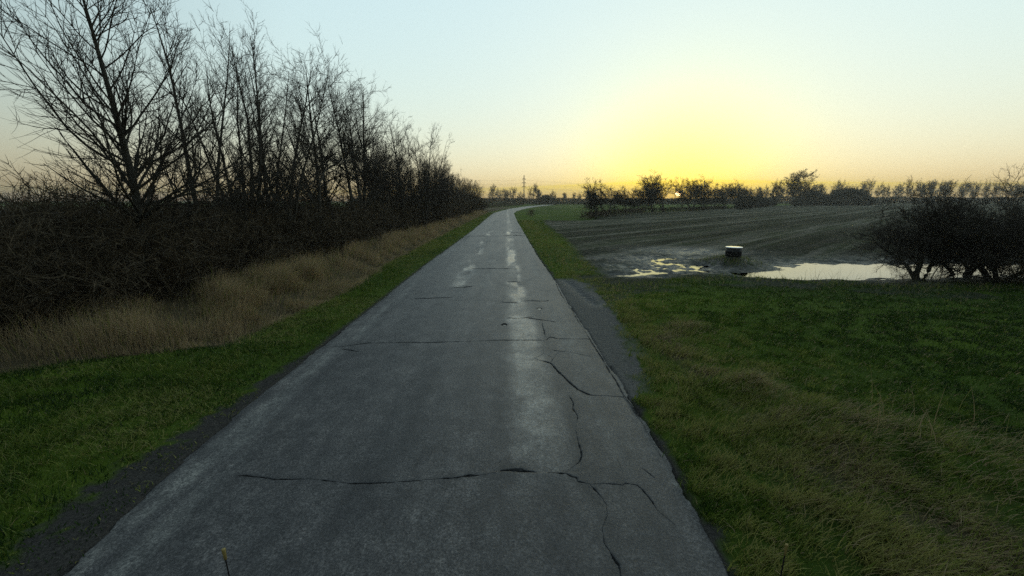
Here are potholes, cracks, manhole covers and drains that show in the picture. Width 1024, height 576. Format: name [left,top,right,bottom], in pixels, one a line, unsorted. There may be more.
crack [238,284,672,576]
